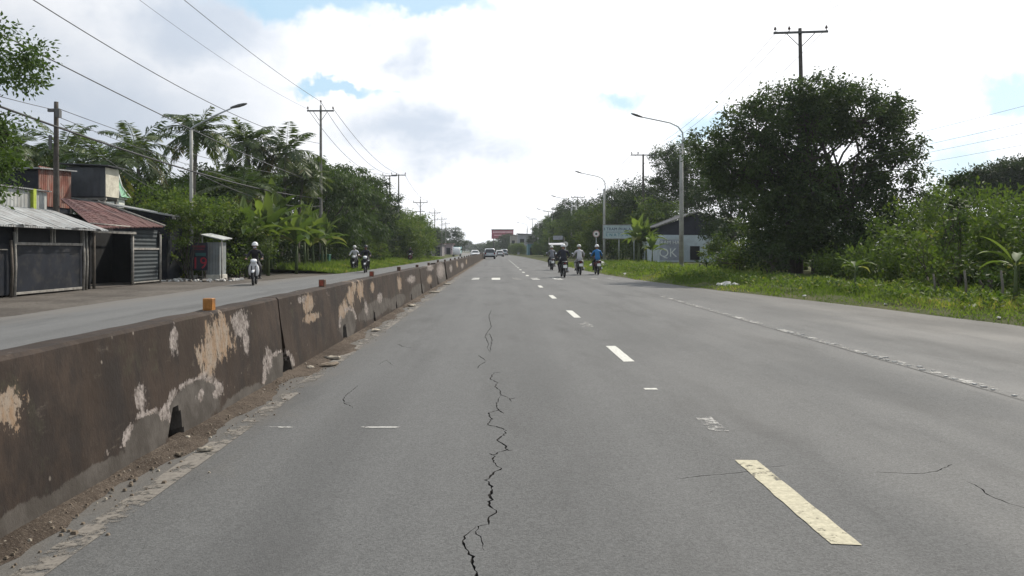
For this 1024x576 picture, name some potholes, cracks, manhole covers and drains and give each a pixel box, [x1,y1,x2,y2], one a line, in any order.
crack [462,313,513,576]
